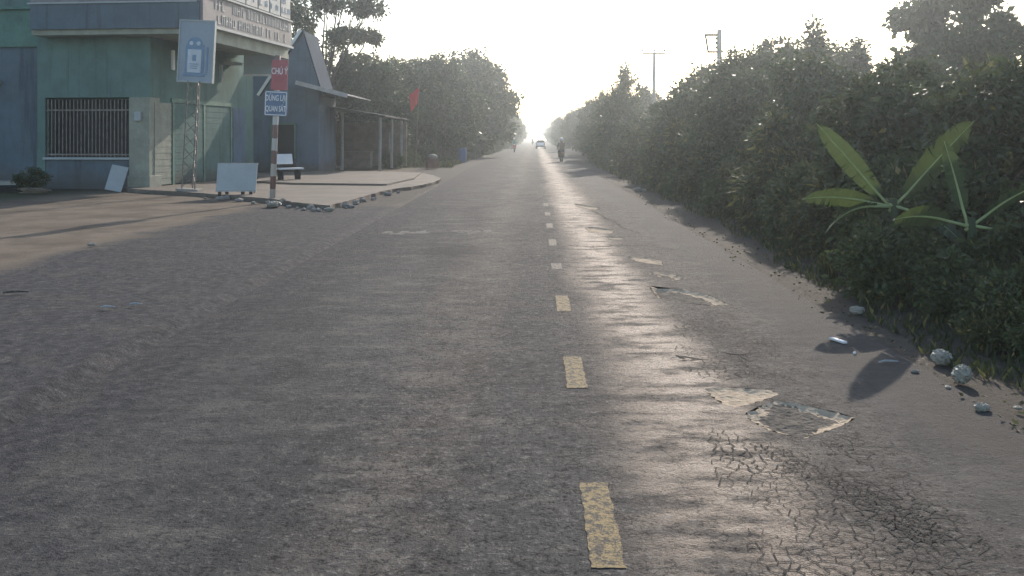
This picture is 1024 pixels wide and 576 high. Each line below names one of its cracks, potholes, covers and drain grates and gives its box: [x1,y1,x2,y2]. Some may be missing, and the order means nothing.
pothole [650,286,727,306]
pothole [705,388,778,407]
pothole [745,401,854,438]
crack [673,310,785,381]
crack [708,428,997,576]
